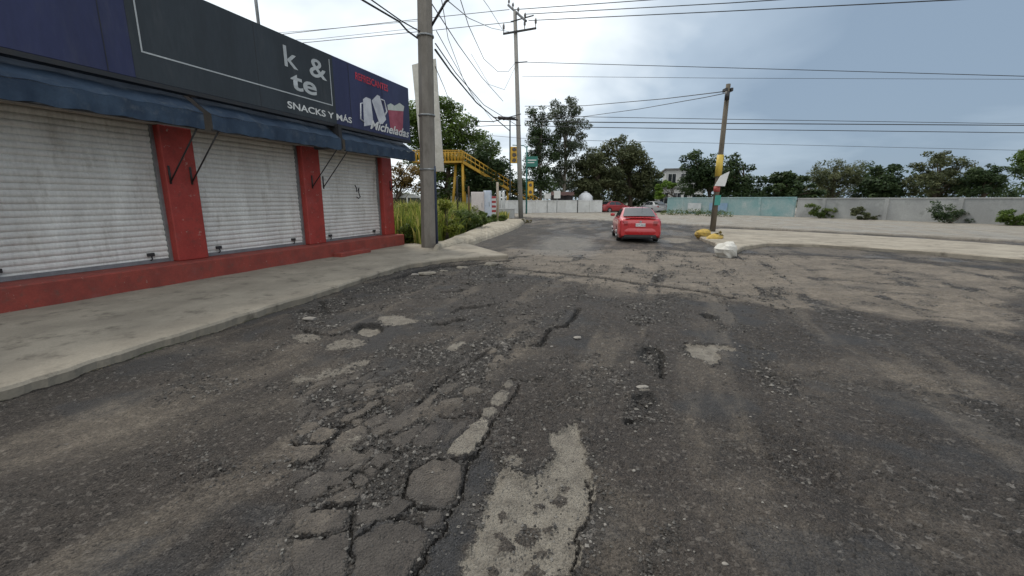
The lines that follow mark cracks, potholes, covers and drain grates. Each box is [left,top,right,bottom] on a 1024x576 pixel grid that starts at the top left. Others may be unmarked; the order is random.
pothole [351,322,386,337]
crack [528,307,583,348]
pothole [635,345,665,371]
crack [287,347,545,576]
